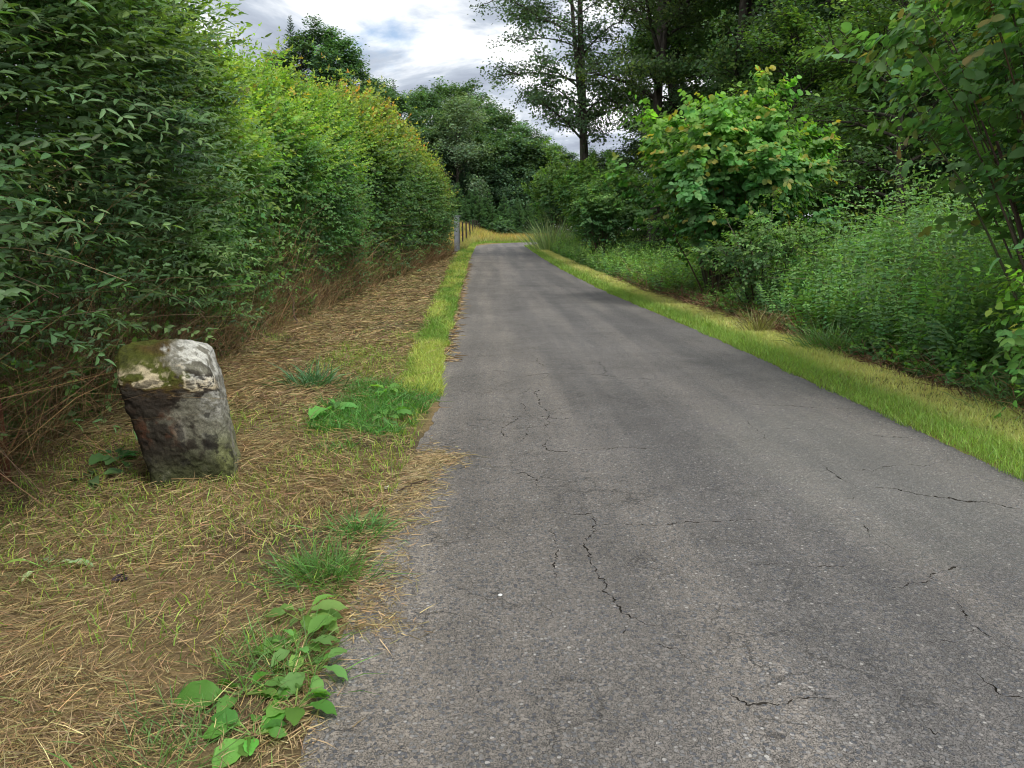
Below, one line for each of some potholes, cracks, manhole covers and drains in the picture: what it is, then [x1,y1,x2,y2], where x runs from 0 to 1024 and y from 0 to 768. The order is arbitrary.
crack [917,600,1018,658]
crack [564,512,771,639]
crack [968,673,1023,698]
crack [828,464,1012,508]
crack [887,566,968,588]
crack [729,684,838,706]
crack [501,356,651,452]
